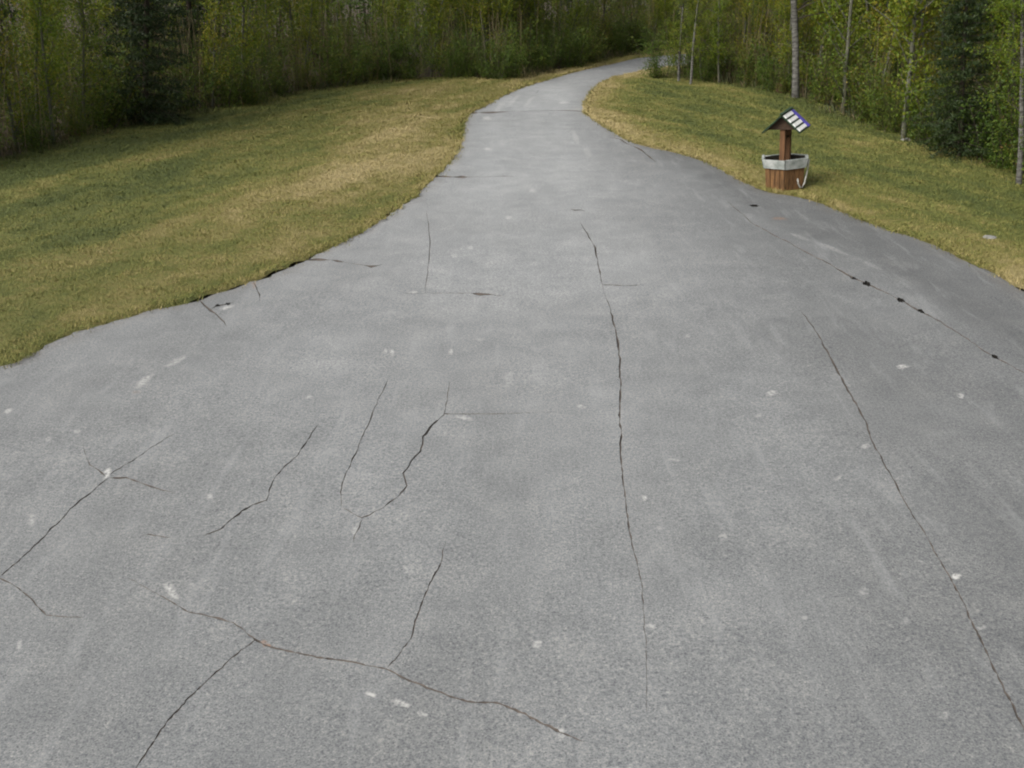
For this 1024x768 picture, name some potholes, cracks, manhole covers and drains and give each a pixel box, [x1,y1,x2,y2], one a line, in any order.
crack [130,542,583,768]
crack [734,207,1024,373]
crack [802,313,1024,729]
crack [0,434,174,618]
crack [340,380,552,542]
crack [408,212,498,296]
crack [205,425,318,535]
crack [309,258,382,268]
crack [199,300,232,325]
